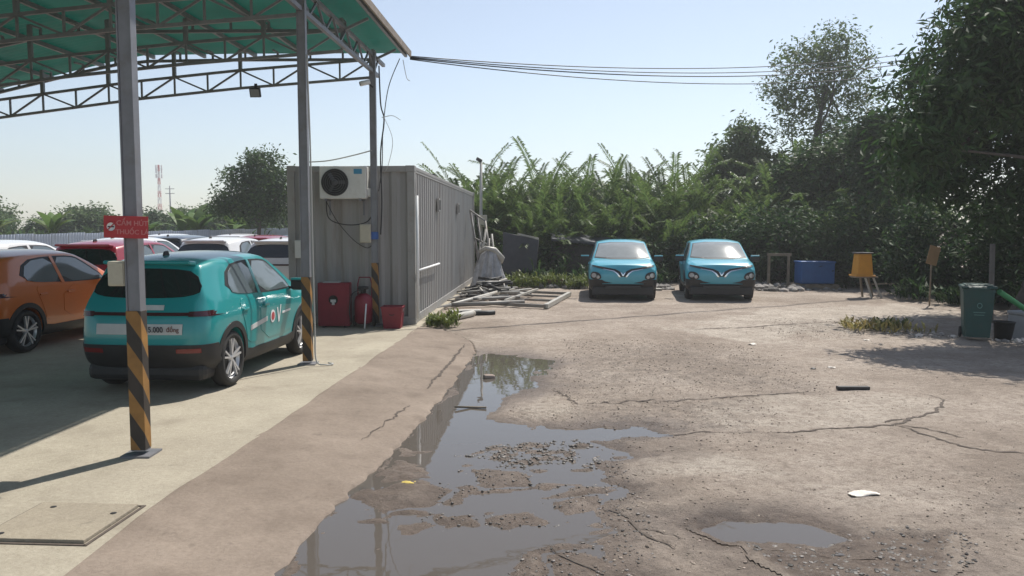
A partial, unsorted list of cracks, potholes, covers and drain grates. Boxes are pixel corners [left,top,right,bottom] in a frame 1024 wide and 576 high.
crack [719,394,1022,453]
crack [553,389,804,404]
manhole cover [0,502,146,546]
pothole [686,510,884,560]
